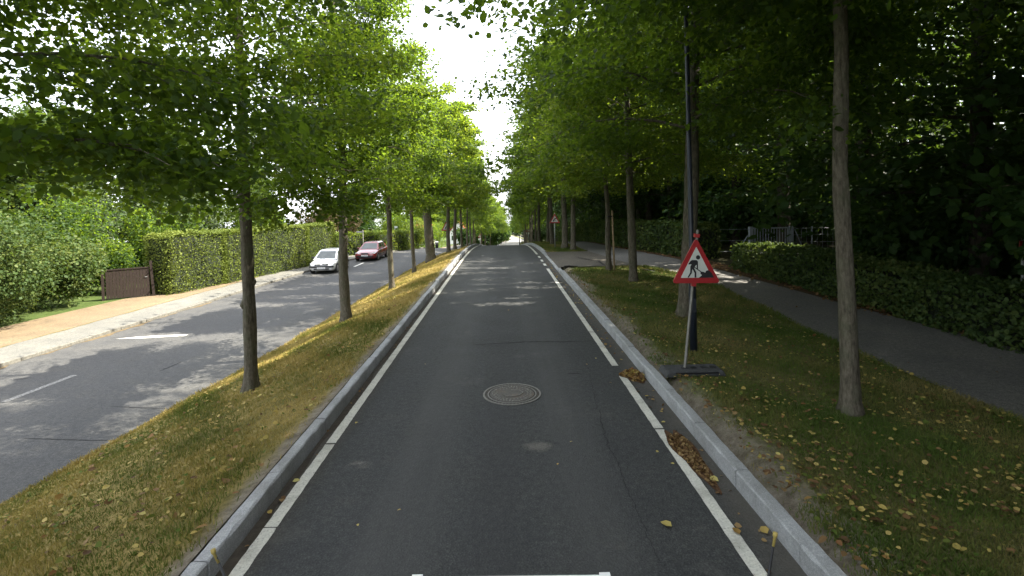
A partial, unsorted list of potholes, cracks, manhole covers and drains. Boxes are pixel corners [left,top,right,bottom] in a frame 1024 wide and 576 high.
crack [568,351,661,563]
manhole cover [483,383,541,405]
